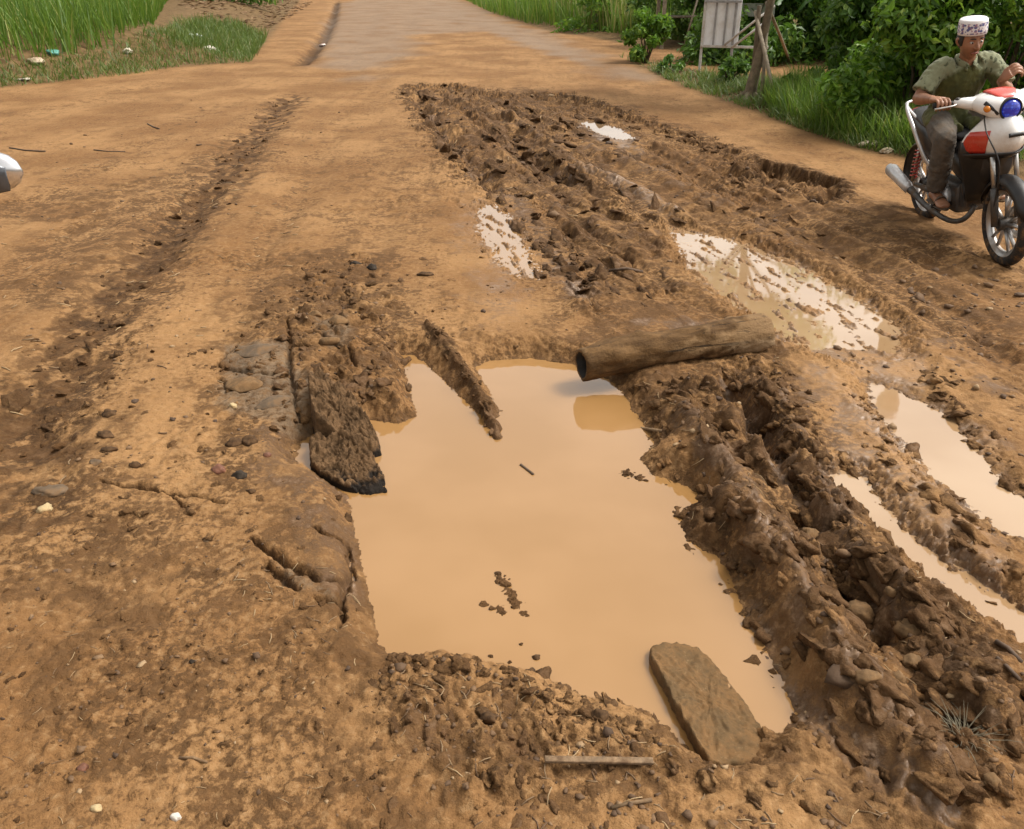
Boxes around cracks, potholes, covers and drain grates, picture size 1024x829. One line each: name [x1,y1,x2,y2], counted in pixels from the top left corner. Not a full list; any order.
crack [101,480,224,509]
pothole [391,82,767,326]
pothole [815,457,1024,641]
pothole [268,331,841,772]
pothole [748,155,855,205]
crack [251,532,343,628]
pothole [855,373,1024,541]
